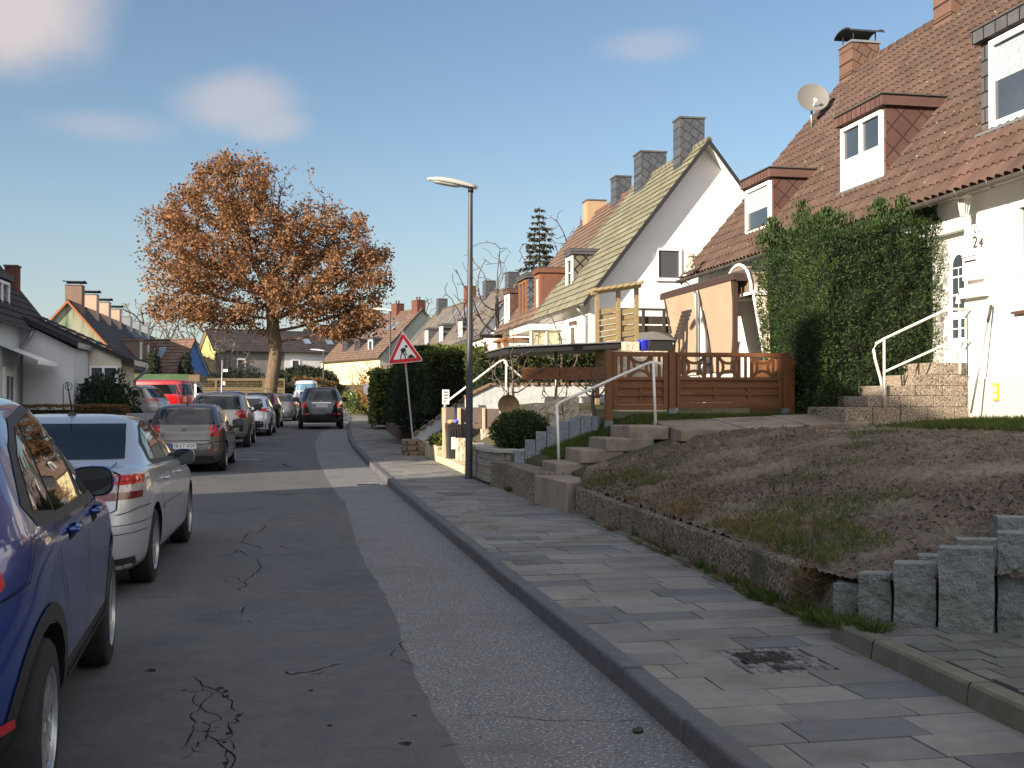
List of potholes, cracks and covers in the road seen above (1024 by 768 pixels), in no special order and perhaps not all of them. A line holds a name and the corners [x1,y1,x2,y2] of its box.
crack [222,525,290,624]
crack [285,663,342,675]
